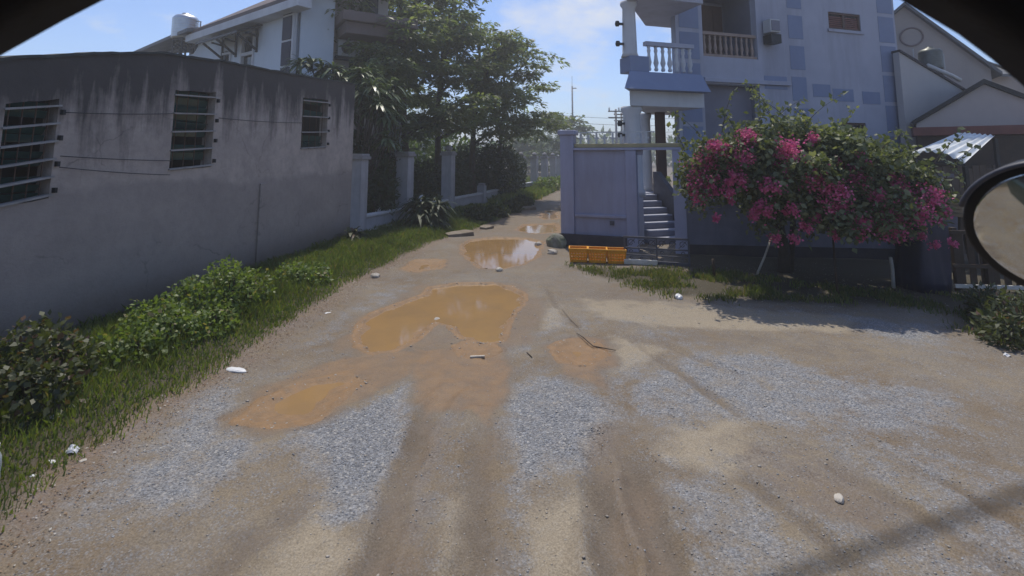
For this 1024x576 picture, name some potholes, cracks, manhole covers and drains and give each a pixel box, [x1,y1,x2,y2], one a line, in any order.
pothole [458,237,545,269]
pothole [349,282,529,356]
pothole [516,222,561,234]
pothole [545,337,612,366]
pothole [228,371,367,429]
